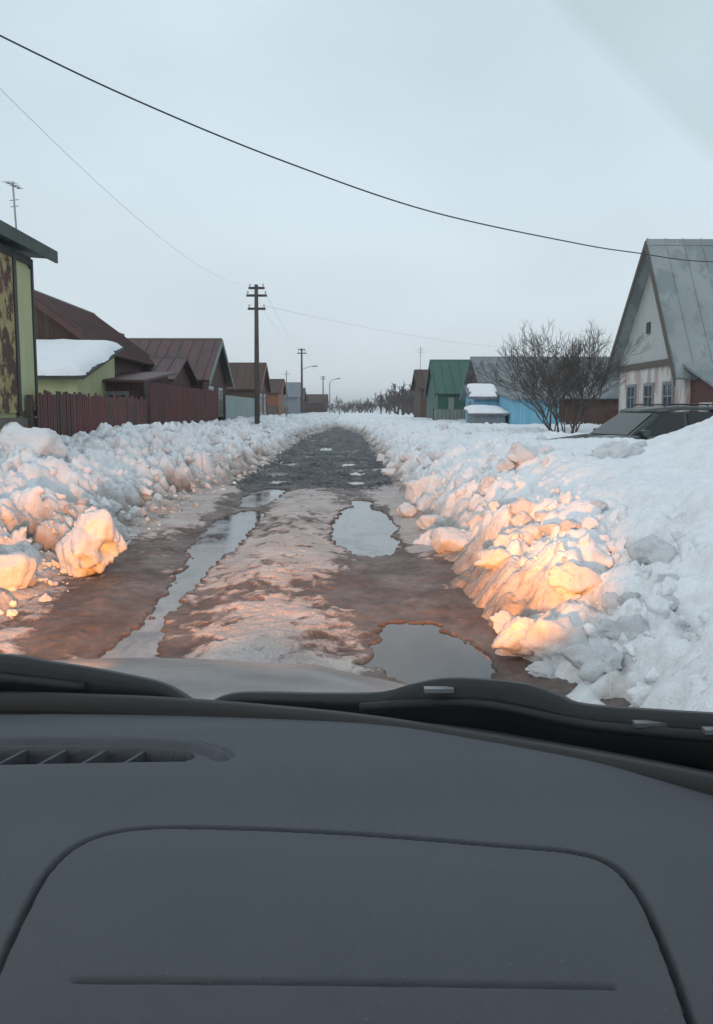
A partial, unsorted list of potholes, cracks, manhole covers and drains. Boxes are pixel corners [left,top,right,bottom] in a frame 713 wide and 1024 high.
pothole [347,618,518,685]
pothole [322,499,409,558]
